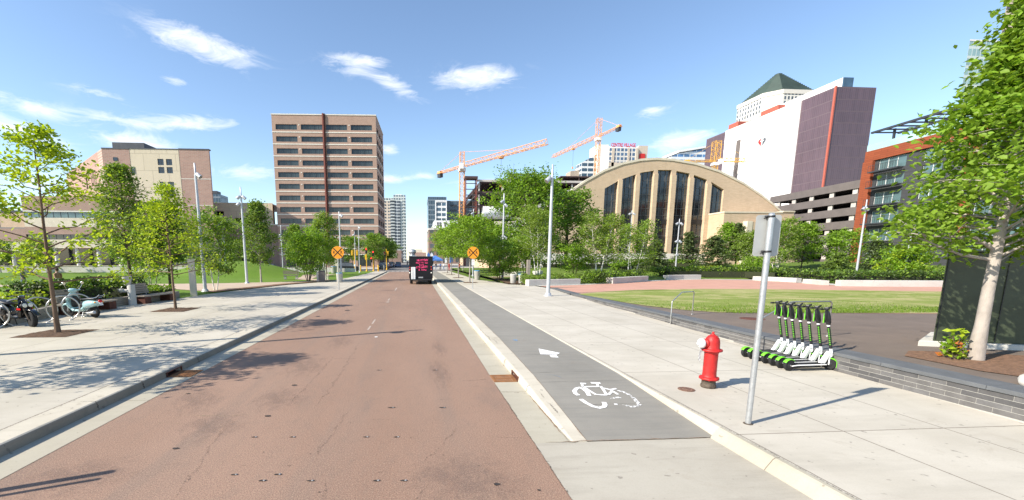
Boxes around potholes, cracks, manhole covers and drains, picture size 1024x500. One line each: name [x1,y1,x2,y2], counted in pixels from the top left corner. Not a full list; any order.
drain grate [166,366,203,377]
drain grate [490,370,519,382]
